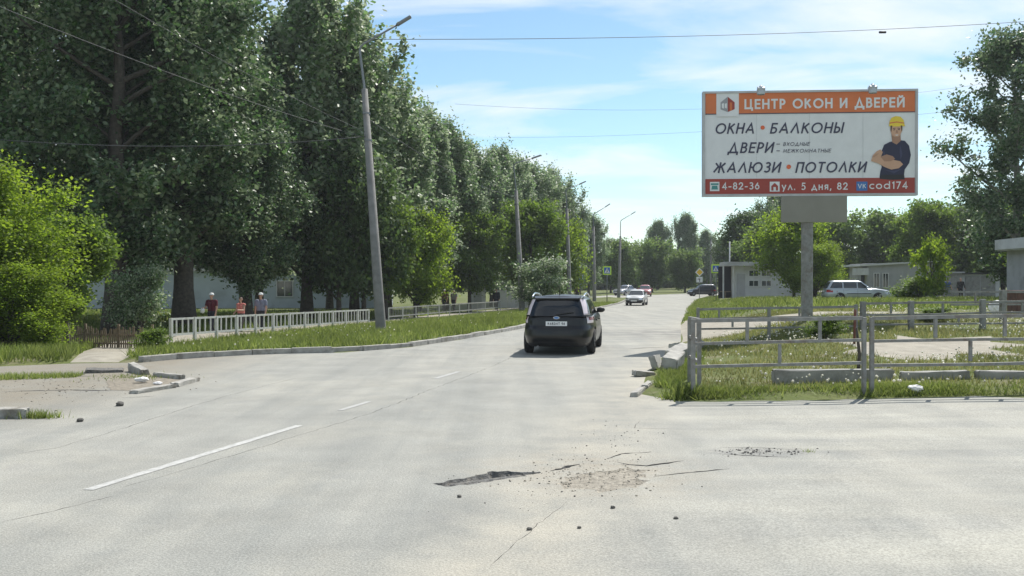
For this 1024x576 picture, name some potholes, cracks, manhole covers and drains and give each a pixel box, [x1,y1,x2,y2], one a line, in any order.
pothole [556,467,648,493]
pothole [434,471,541,487]
crack [607,447,805,477]
